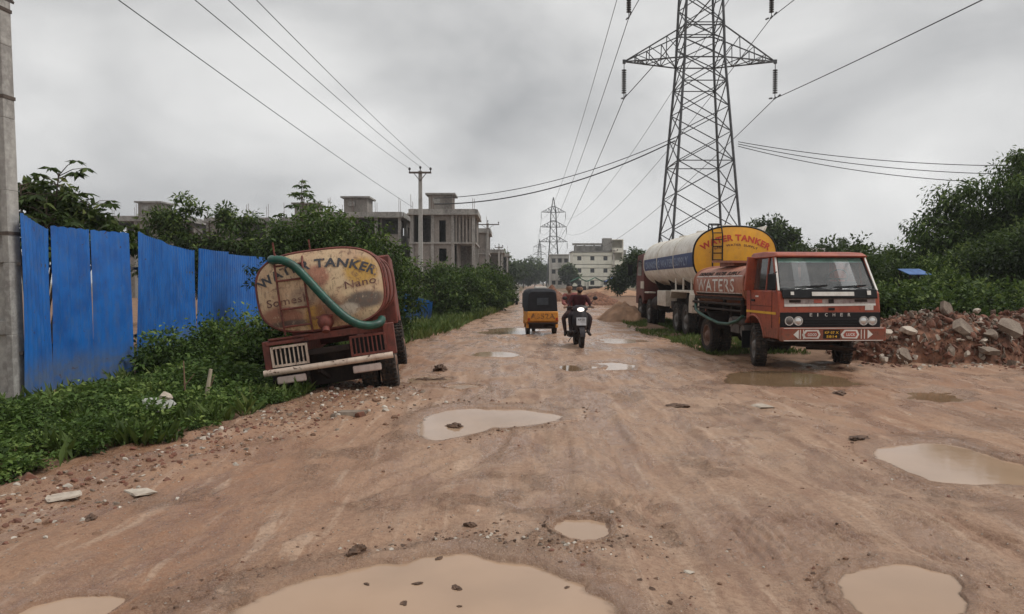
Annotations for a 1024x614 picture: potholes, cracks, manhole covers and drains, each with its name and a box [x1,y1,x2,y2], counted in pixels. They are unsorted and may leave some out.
pothole [819,552,986,614]
pothole [467,326,551,336]
pothole [169,538,670,614]
pothole [576,360,642,372]
pothole [458,349,529,358]
pothole [394,402,583,447]
pothole [851,434,1024,491]
pothole [546,362,608,373]
pothole [708,367,885,389]
pothole [885,386,985,405]
pothole [0,587,144,614]
pothole [593,336,659,345]
